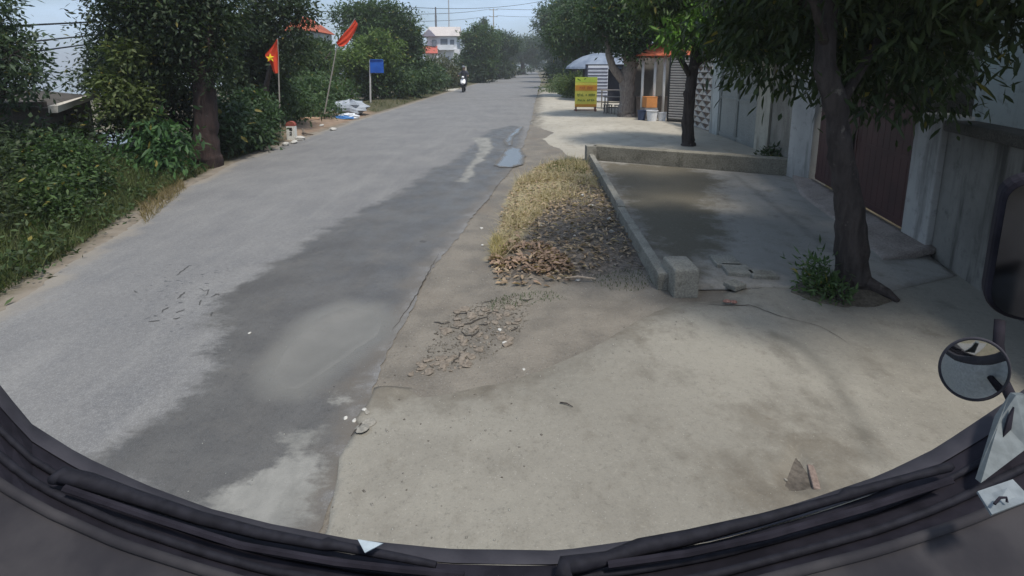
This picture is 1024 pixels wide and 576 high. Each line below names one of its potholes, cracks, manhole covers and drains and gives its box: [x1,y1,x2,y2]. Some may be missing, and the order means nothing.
crack [710,304,842,339]
